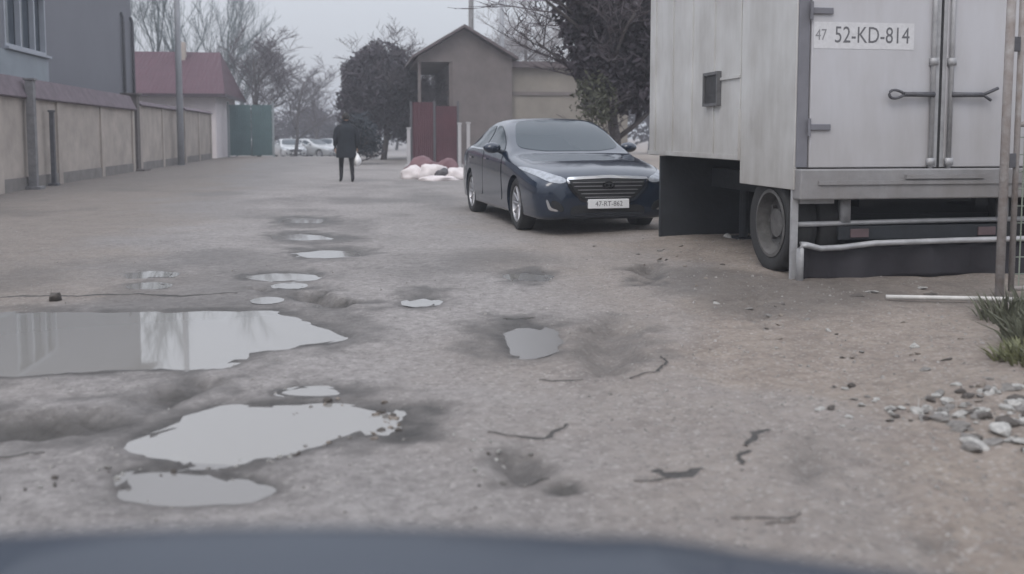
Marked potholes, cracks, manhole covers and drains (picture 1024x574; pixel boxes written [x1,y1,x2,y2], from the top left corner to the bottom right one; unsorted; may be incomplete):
pothole [260,288,348,309]
pothole [123,403,407,472]
crack [487,424,570,441]
pothole [468,319,564,360]
crack [734,429,773,464]
pothole [286,246,362,260]
crack [731,512,802,526]
pothole [235,271,325,283]
pothole [0,304,355,379]
pothole [125,271,179,279]
pothole [401,287,444,308]
crack [634,467,707,483]
